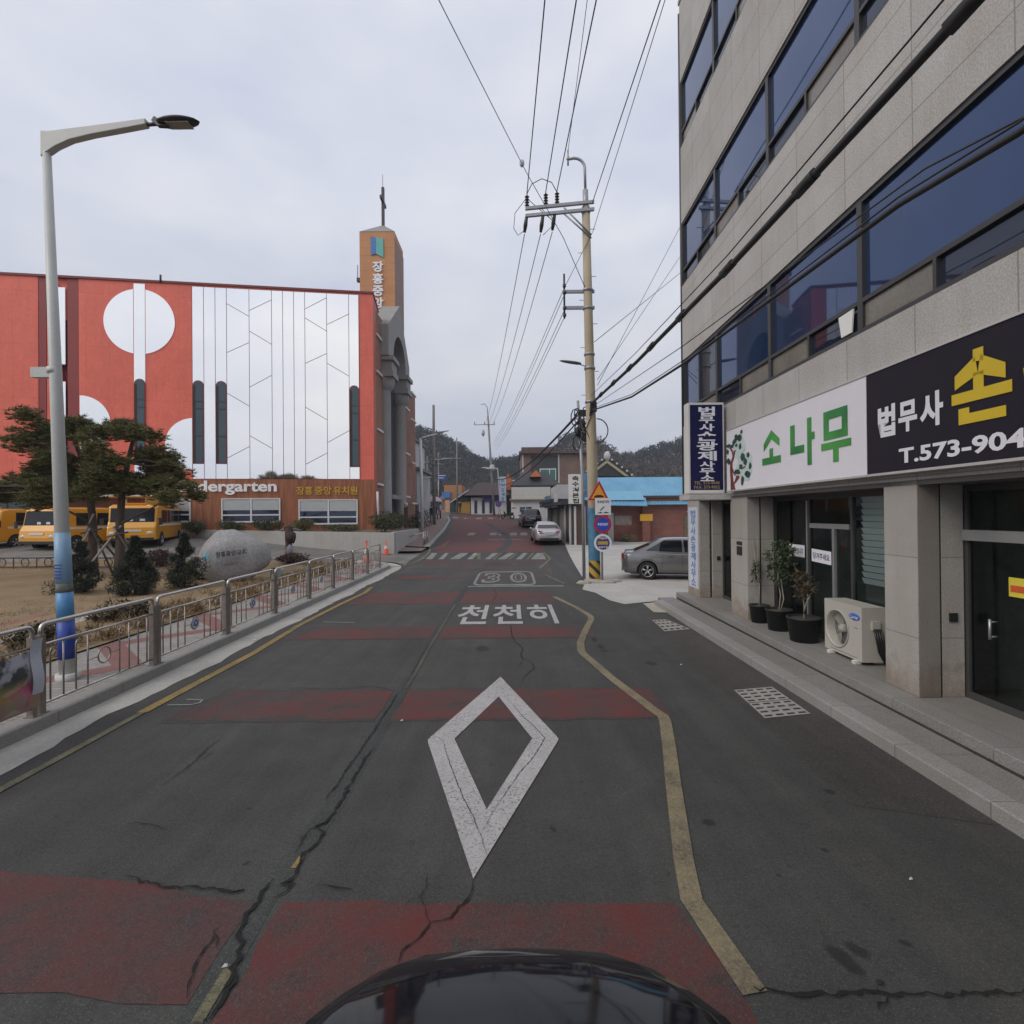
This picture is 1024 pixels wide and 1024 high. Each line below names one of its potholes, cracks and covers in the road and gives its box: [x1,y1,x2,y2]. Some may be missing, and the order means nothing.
crack [398,874,474,962]
crack [754,980,1024,1009]
crack [126,875,273,1022]
drain grate [734,687,811,719]
drain grate [652,619,690,632]
